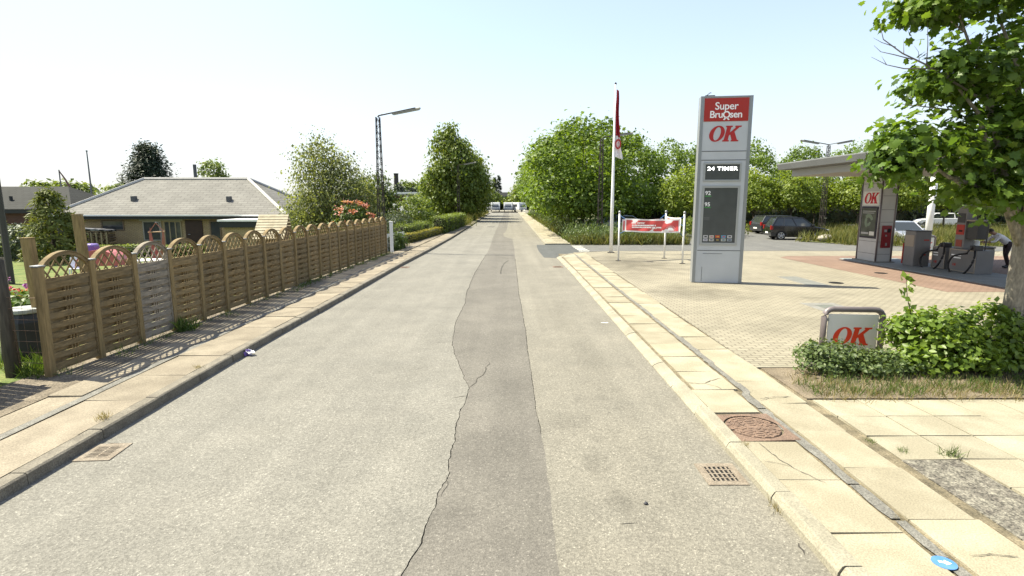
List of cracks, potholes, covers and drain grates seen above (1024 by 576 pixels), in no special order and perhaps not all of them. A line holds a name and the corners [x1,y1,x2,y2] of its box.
drain grate [694,463,750,486]
manhole cover [717,414,801,442]
crack [500,260,541,432]
crack [401,257,490,576]
drain grate [72,443,133,462]
